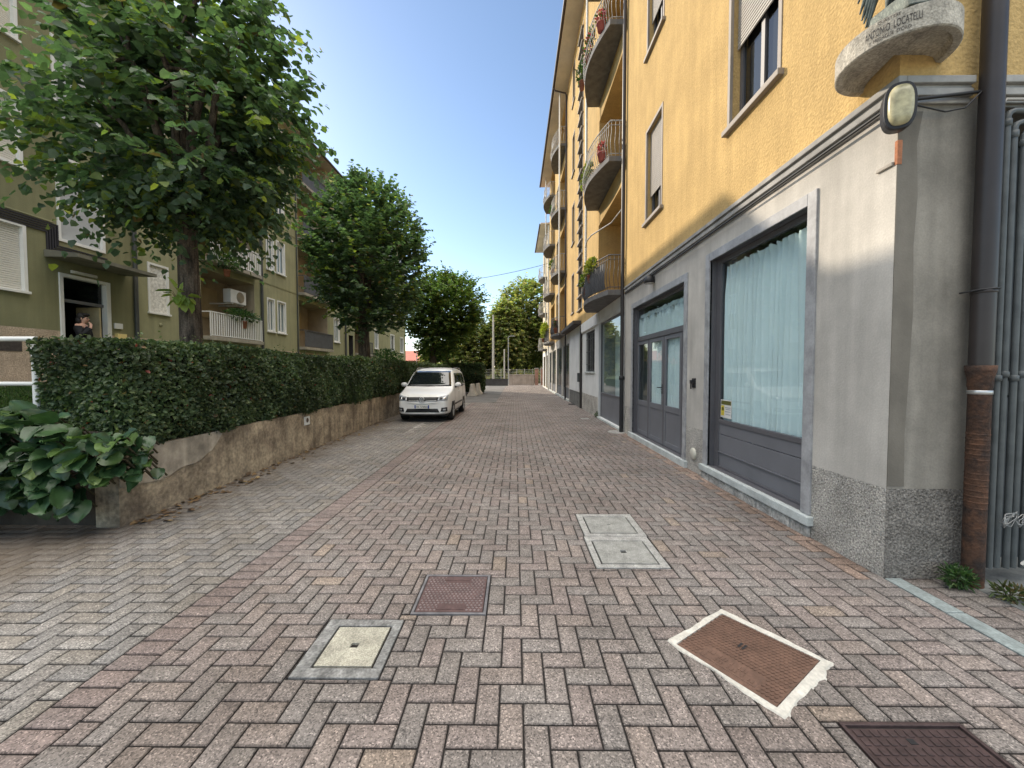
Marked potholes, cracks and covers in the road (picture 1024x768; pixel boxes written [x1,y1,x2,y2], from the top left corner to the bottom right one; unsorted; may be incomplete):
manhole cover [410,575,491,616]
manhole cover [576,514,647,537]
manhole cover [288,619,404,680]
manhole cover [584,536,671,569]
manhole cover [838,722,1015,768]
manhole cover [668,609,834,719]
